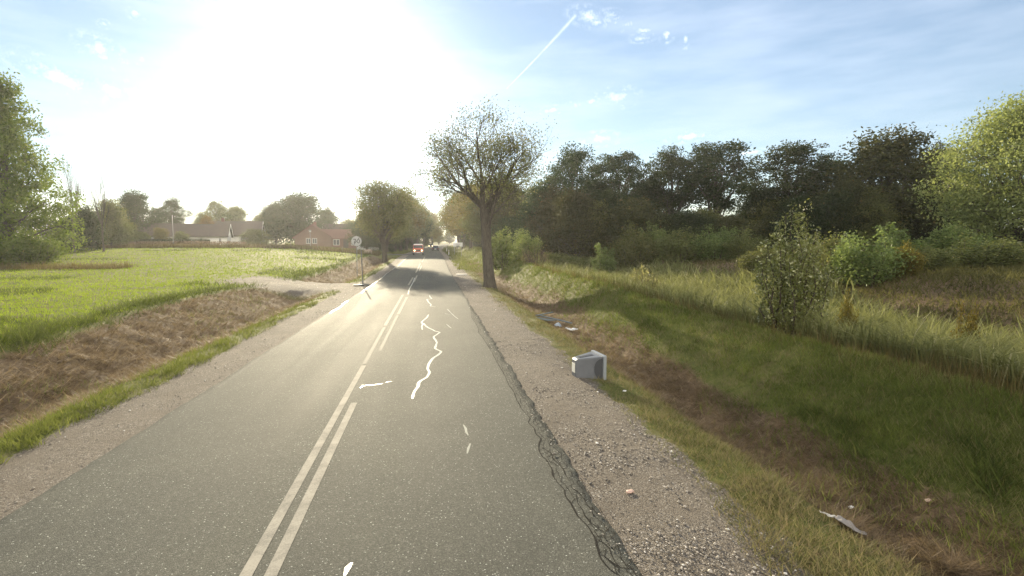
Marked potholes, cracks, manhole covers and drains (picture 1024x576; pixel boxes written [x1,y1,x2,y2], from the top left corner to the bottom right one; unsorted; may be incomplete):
crack [470,305,643,576]
